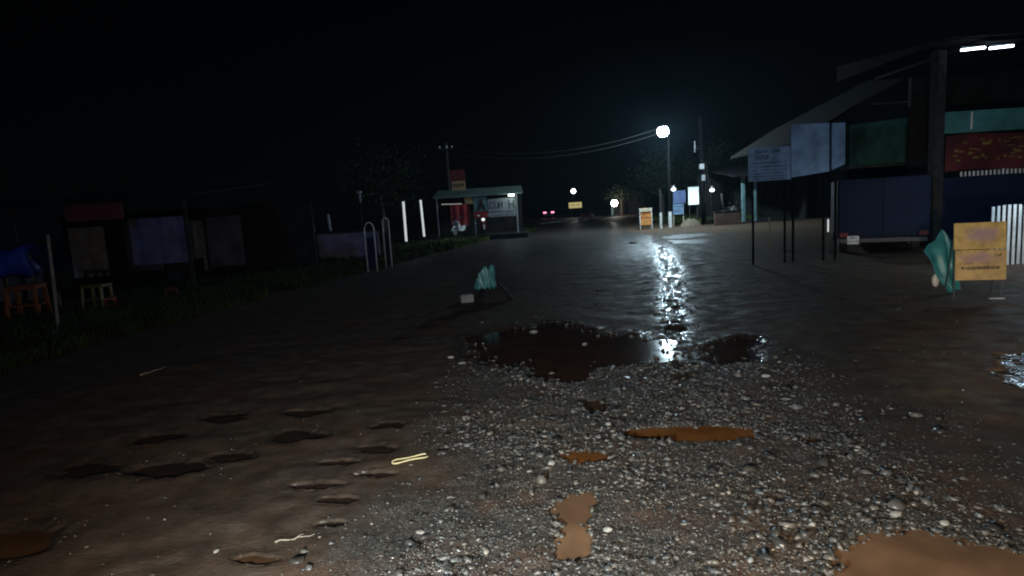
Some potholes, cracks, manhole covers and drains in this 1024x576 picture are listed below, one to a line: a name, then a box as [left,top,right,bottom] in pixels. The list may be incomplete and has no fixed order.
pothole [459,320,690,385]
pothole [264,427,337,445]
pothole [43,457,133,481]
pothole [196,410,252,424]
pothole [695,334,770,365]
pothole [278,406,338,418]
pothole [201,447,262,467]
pothole [117,457,220,482]
pothole [227,551,286,567]
pothole [122,429,190,447]
pothole [282,477,353,491]
pothole [0,520,73,562]
